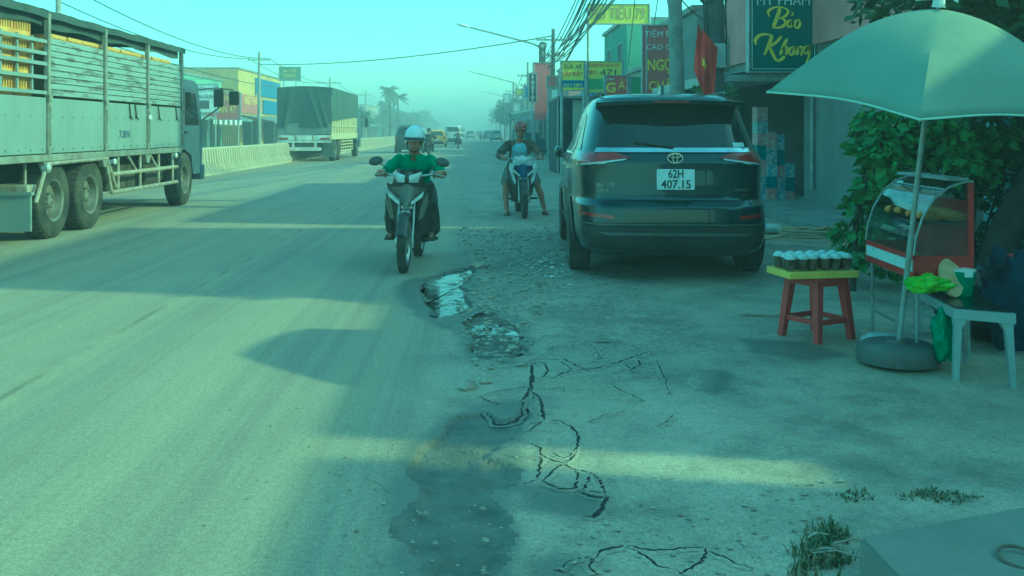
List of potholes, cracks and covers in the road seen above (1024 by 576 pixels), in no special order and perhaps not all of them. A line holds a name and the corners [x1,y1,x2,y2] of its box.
crack [477,339,677,521]
pothole [443,308,548,366]
pothole [404,264,487,325]
crack [553,543,755,576]
